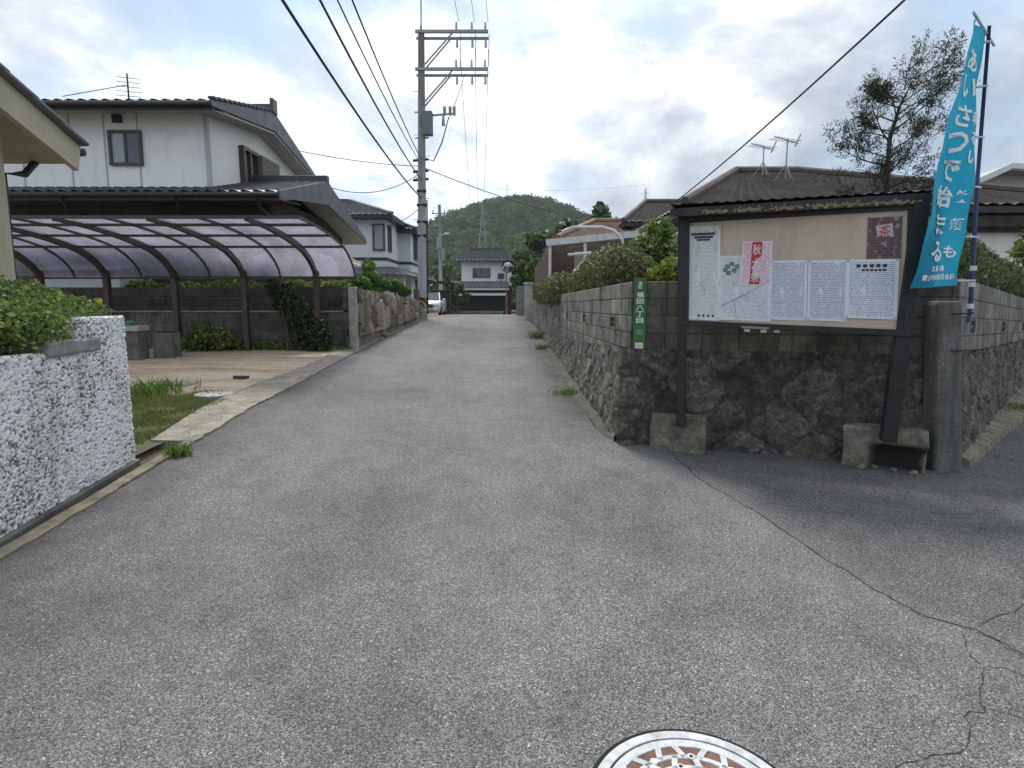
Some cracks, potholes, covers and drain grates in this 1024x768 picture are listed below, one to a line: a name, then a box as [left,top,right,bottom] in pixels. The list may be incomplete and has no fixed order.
manhole cover [194,391,233,399]
manhole cover [593,729,776,768]
crack [665,449,1024,768]
